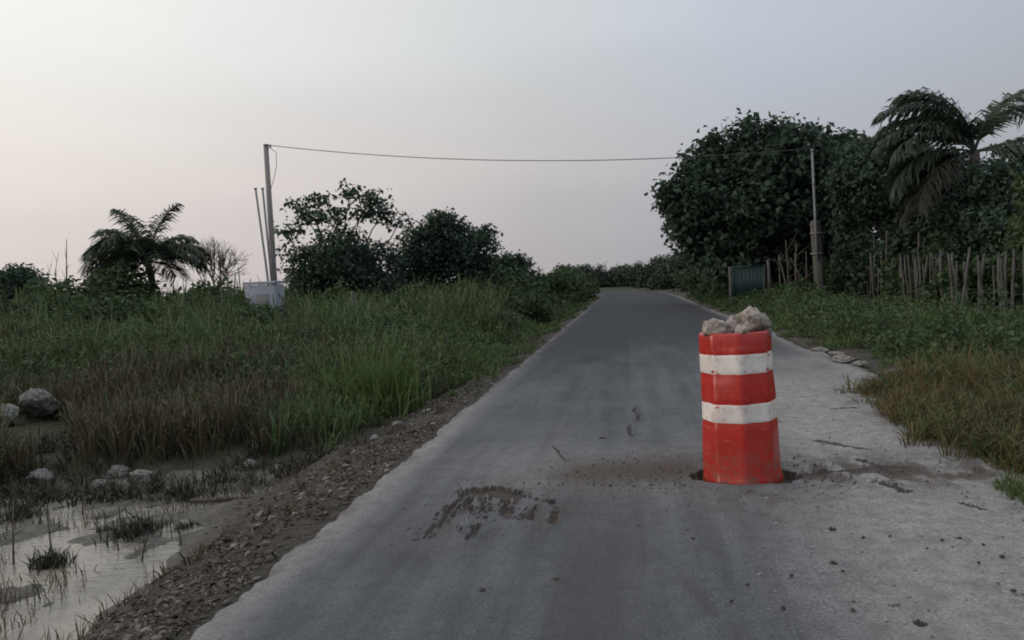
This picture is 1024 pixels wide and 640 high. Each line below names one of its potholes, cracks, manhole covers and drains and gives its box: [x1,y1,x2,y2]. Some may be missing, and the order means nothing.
pothole [406,485,556,541]
crack [794,440,913,493]
pothole [547,507,561,524]
pothole [689,469,802,484]
